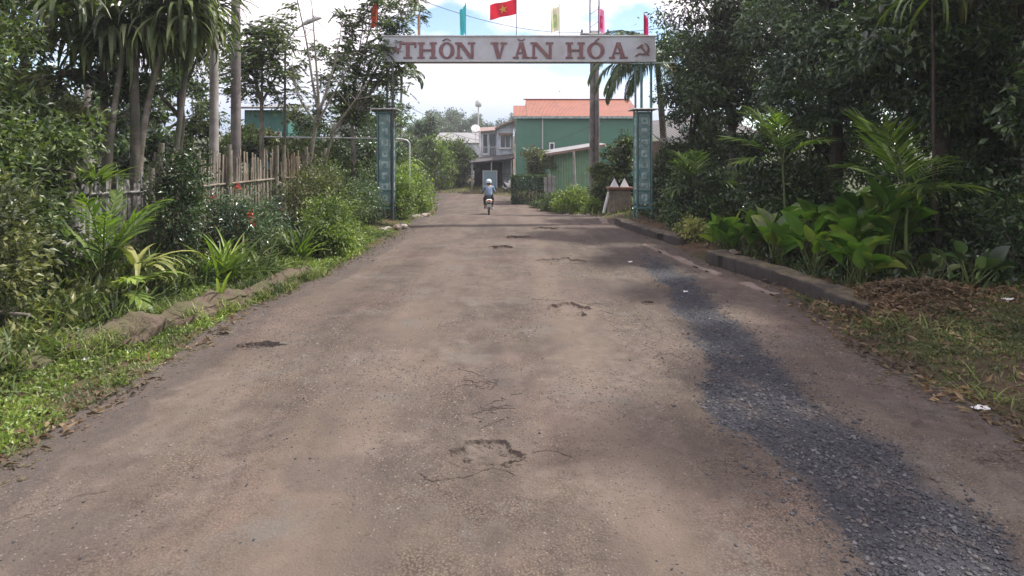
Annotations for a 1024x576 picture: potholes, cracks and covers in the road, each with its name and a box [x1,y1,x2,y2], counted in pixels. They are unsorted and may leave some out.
crack [418,450,572,482]
crack [453,368,527,430]
pothole [525,256,596,268]
pothole [436,435,541,472]
pothole [223,340,294,351]
pothole [538,300,600,321]
